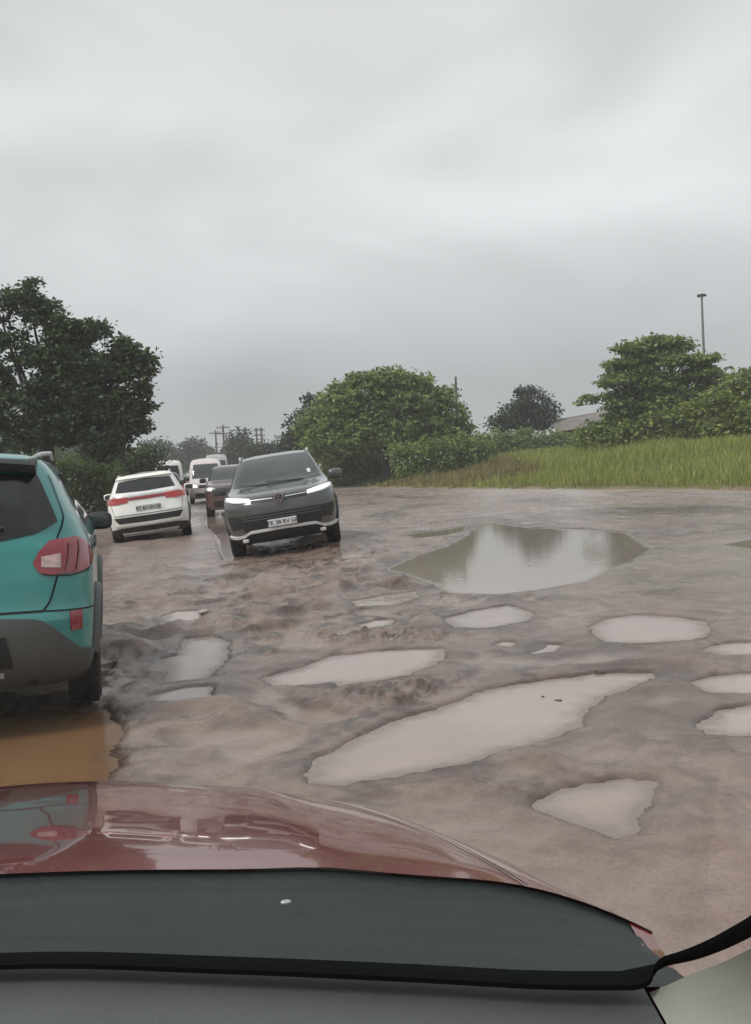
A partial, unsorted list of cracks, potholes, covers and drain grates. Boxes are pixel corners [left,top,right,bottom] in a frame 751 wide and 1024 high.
pothole [669,664,751,697]
pothole [143,628,244,685]
pothole [278,664,679,788]
pothole [675,696,751,740]
pothole [246,642,461,690]
pothole [149,607,214,623]
pothole [130,679,230,703]
pothole [506,765,687,848]
pothole [574,609,727,645]
pothole [377,520,661,595]
pothole [341,587,431,607]
pothole [430,600,549,629]
